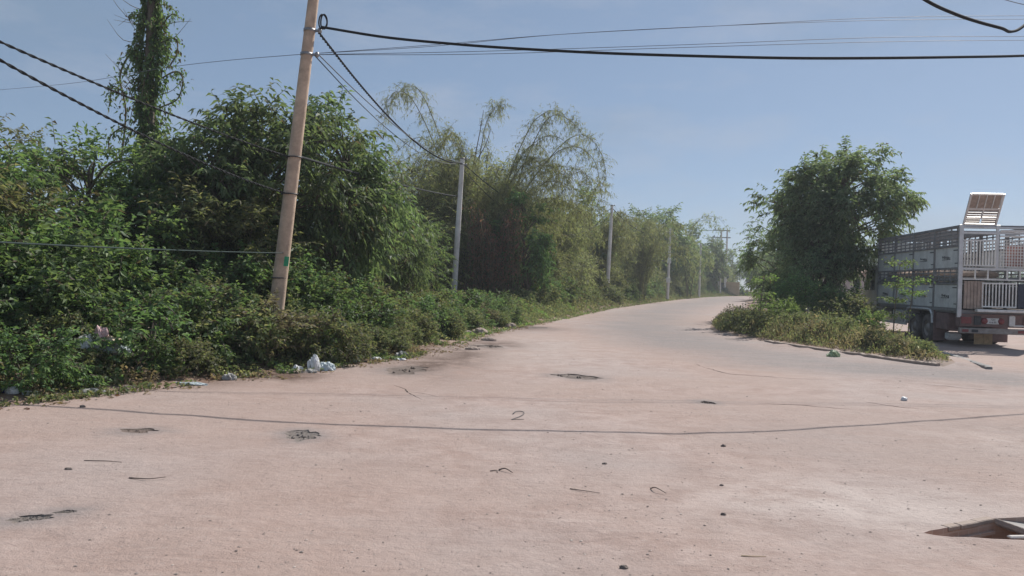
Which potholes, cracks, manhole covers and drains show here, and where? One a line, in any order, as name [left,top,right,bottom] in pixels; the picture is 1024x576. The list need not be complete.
pothole [386,366,428,375]
pothole [5,514,55,523]
pothole [284,430,321,442]
